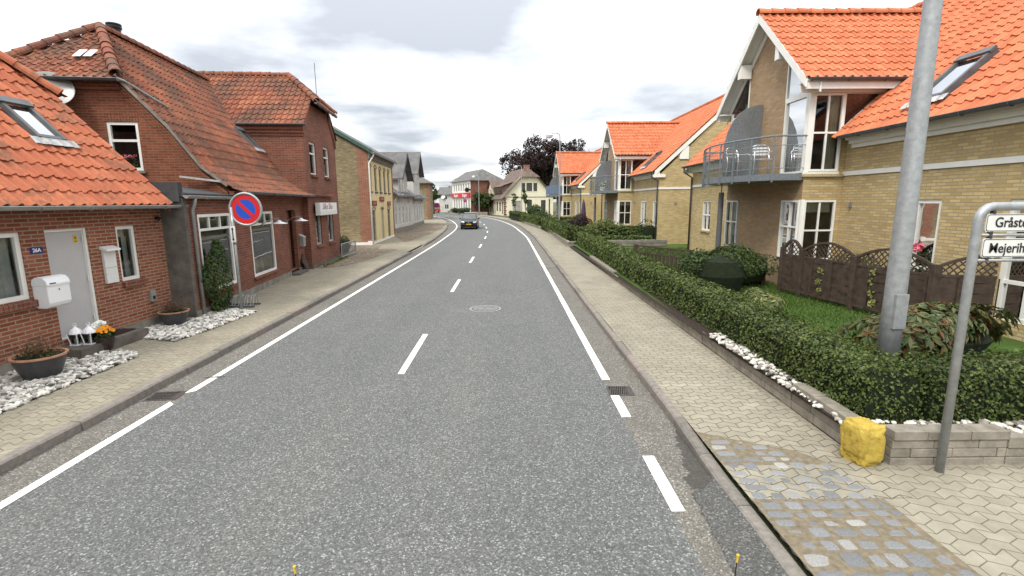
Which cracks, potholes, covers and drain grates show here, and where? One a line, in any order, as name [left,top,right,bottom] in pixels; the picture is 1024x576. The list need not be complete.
drain grate [142,391,187,402]
drain grate [606,386,635,396]
